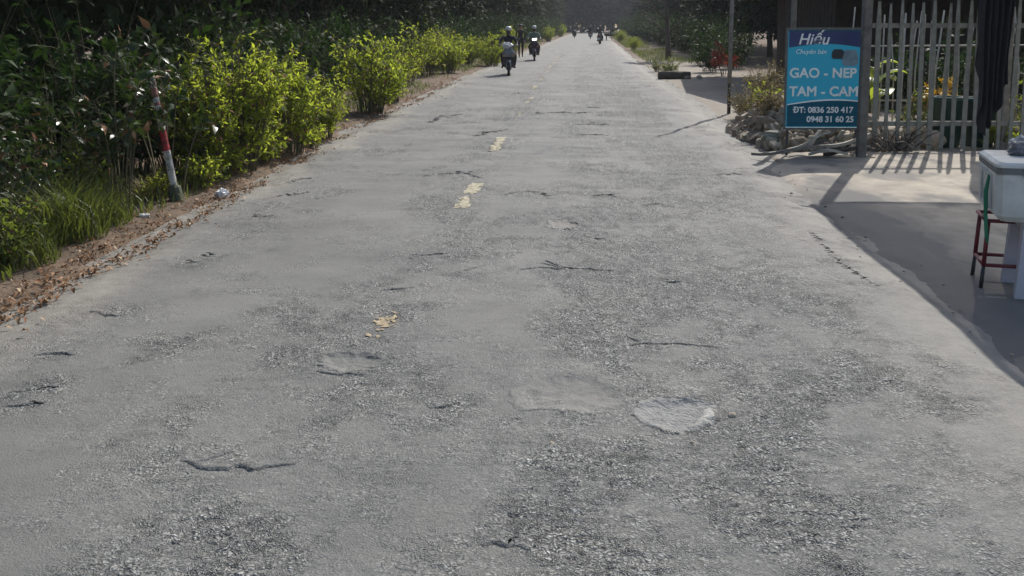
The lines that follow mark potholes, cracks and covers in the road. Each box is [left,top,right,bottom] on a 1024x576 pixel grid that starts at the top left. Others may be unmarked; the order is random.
crack [806,230,880,285]
crack [88,309,129,318]
crack [177,449,298,474]
crack [0,384,61,409]
crack [428,114,507,136]
crack [623,335,720,349]
crack [520,260,614,272]
crack [480,534,538,553]
crack [531,107,613,136]
